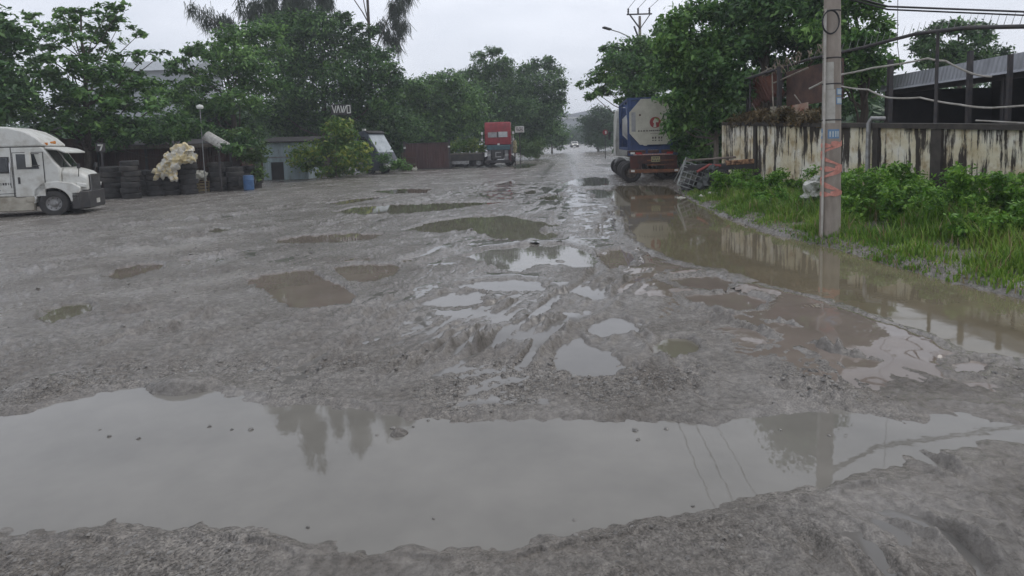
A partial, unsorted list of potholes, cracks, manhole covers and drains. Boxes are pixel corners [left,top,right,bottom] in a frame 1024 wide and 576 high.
pothole [579,313,650,337]
pothole [404,214,564,240]
pothole [325,262,402,282]
pothole [546,332,633,377]
pothole [244,267,358,308]
pothole [103,261,166,280]
pothole [0,373,1024,558]
pothole [276,231,383,244]
pothole [682,290,771,310]
pothole [35,299,97,323]
pothole [465,242,600,272]
pothole [335,201,509,215]
